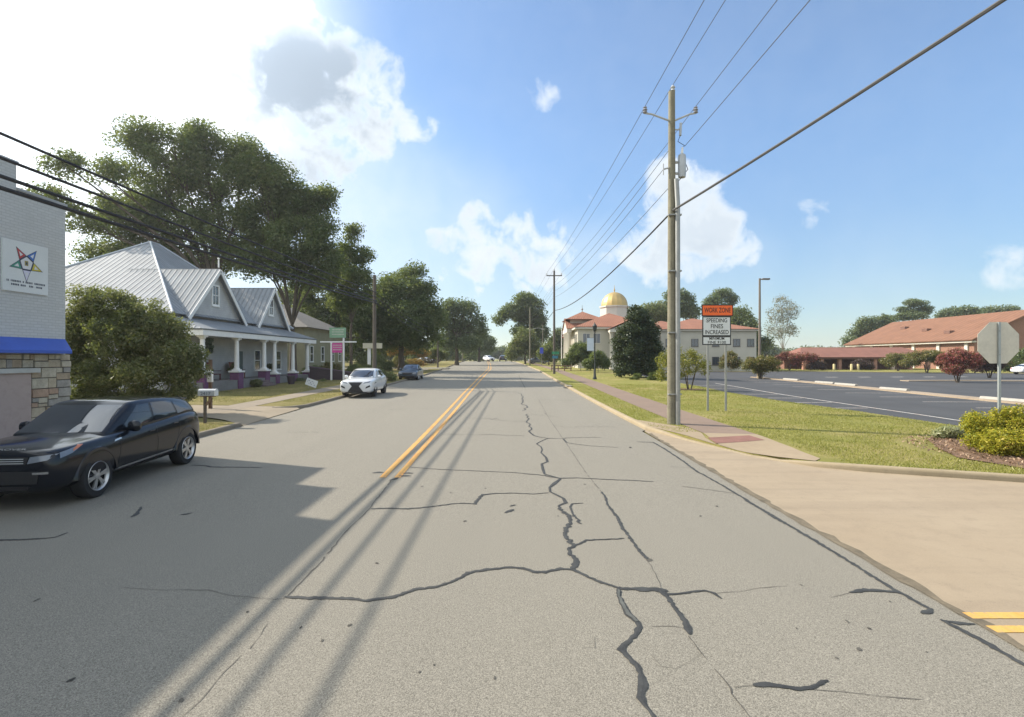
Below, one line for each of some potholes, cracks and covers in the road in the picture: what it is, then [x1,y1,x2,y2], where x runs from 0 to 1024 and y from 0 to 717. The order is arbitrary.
crack [125,587,282,599]
